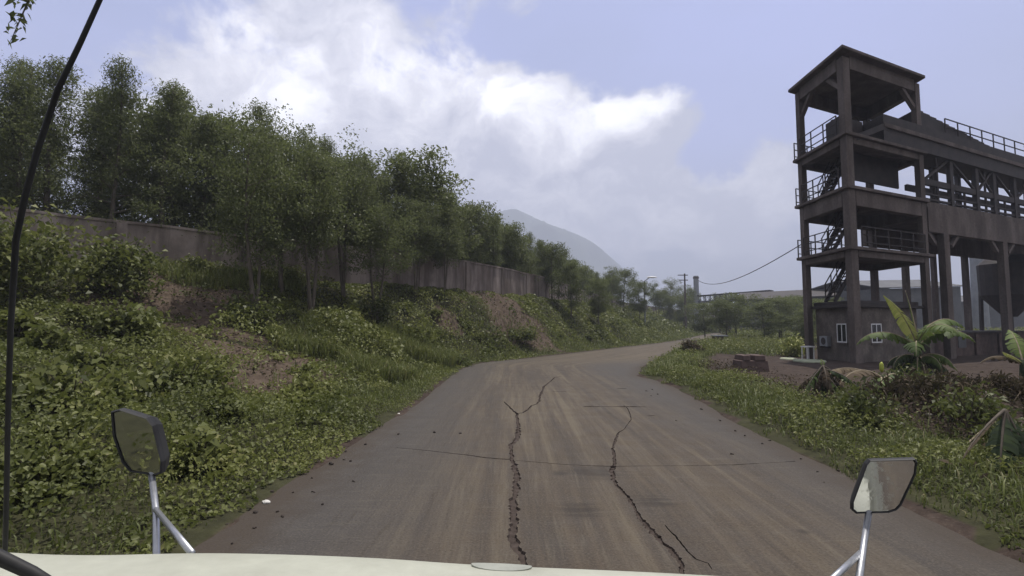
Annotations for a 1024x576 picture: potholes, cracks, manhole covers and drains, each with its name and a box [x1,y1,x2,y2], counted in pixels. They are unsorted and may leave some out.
crack [404,377,794,574]
